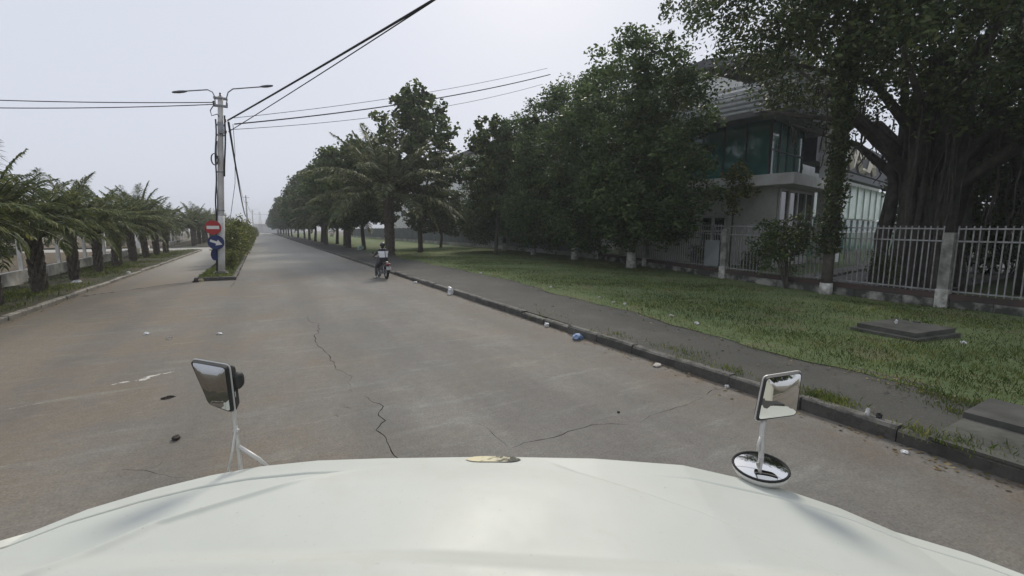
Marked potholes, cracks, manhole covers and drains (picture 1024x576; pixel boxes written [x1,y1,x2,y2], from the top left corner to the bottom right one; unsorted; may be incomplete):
crack [475,388,724,446]
crack [312,322,398,458]
